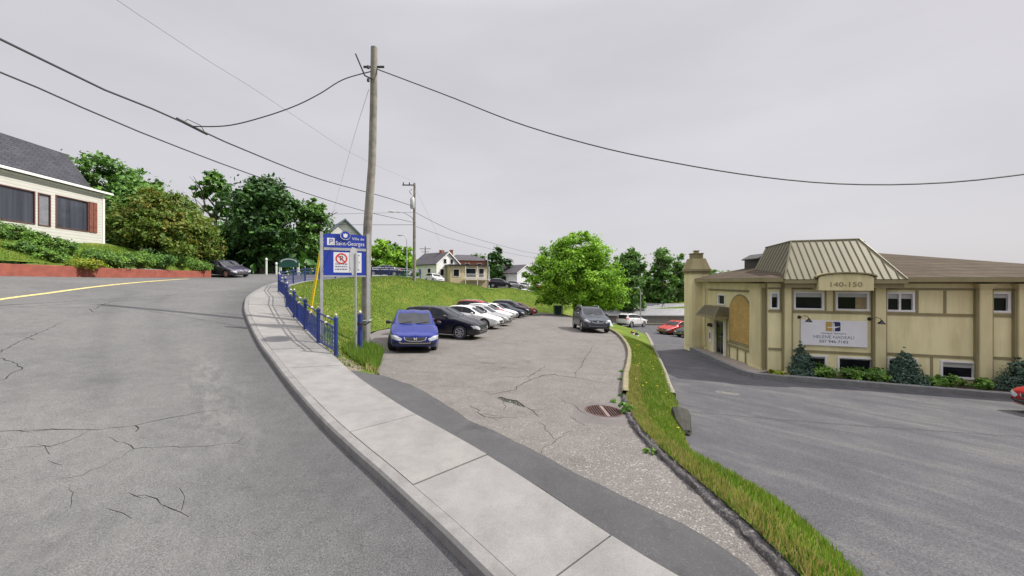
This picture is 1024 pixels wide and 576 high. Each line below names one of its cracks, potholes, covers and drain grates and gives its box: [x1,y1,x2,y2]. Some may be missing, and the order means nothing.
crack [106,488,189,519]
crack [1,323,60,381]
drain grate [585,405,624,417]
crack [4,408,243,509]
